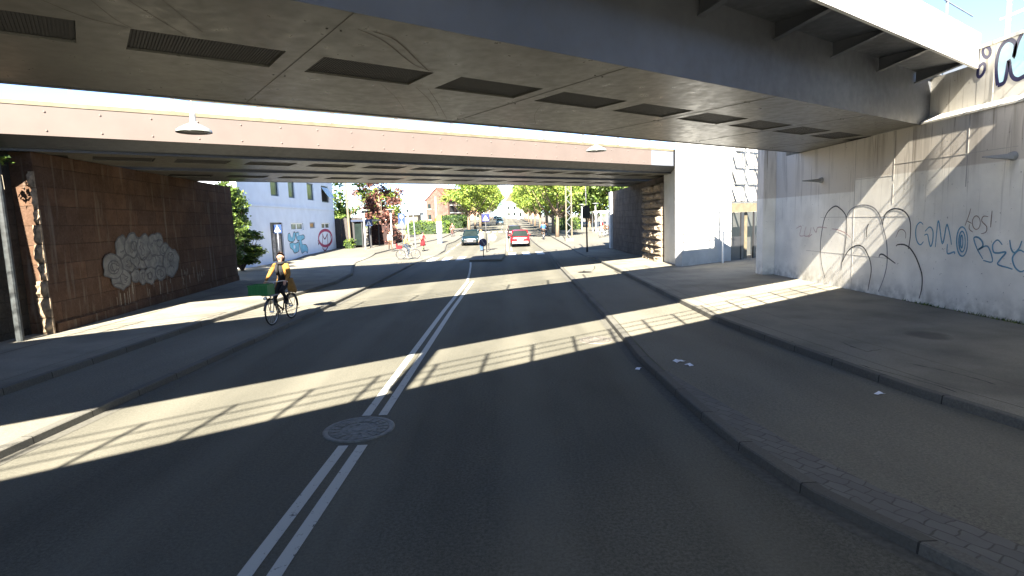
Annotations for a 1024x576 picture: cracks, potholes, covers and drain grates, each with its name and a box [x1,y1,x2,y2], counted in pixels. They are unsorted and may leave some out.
manhole cover [322,417,395,443]
